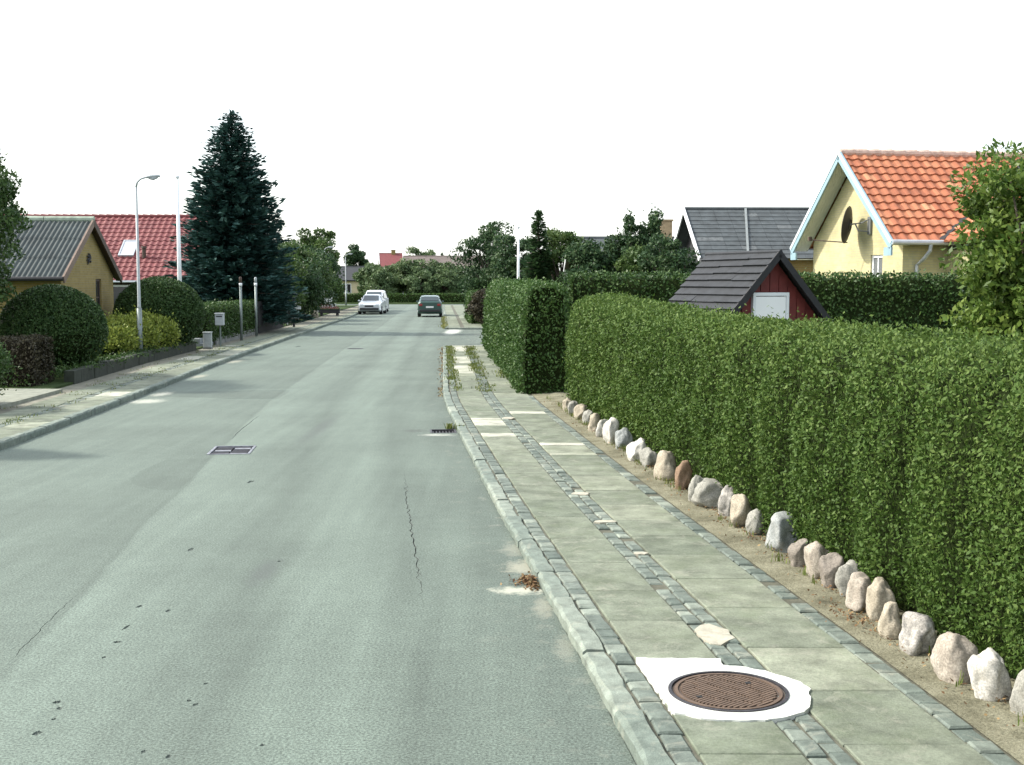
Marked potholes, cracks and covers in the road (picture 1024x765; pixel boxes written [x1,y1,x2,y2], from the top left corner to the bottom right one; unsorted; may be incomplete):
crack [404,475,423,600]
manhole cover [668,671,789,712]
